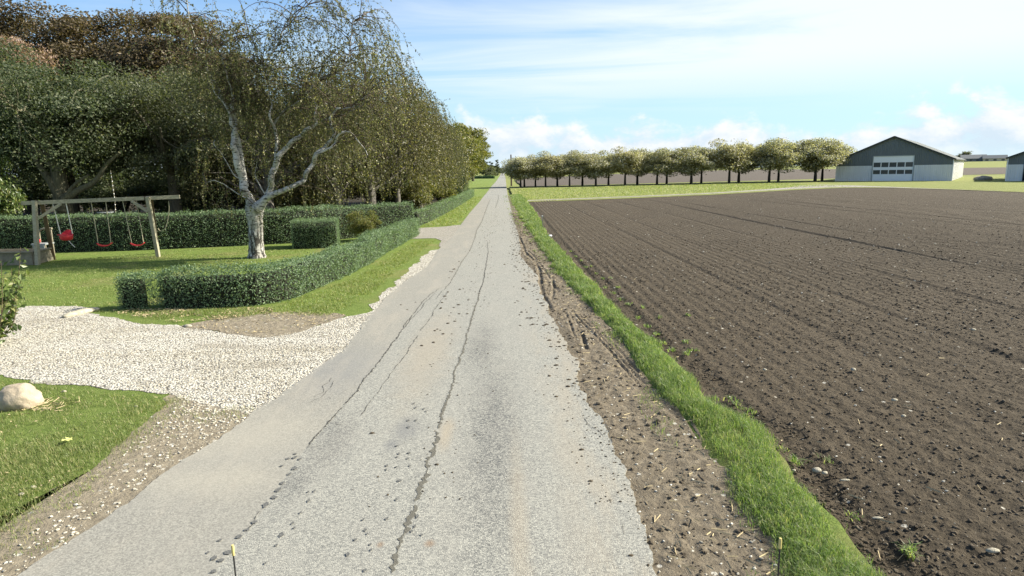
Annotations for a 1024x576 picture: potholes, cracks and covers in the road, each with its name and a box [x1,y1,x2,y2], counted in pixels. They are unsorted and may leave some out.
crack [361,196,499,414]
